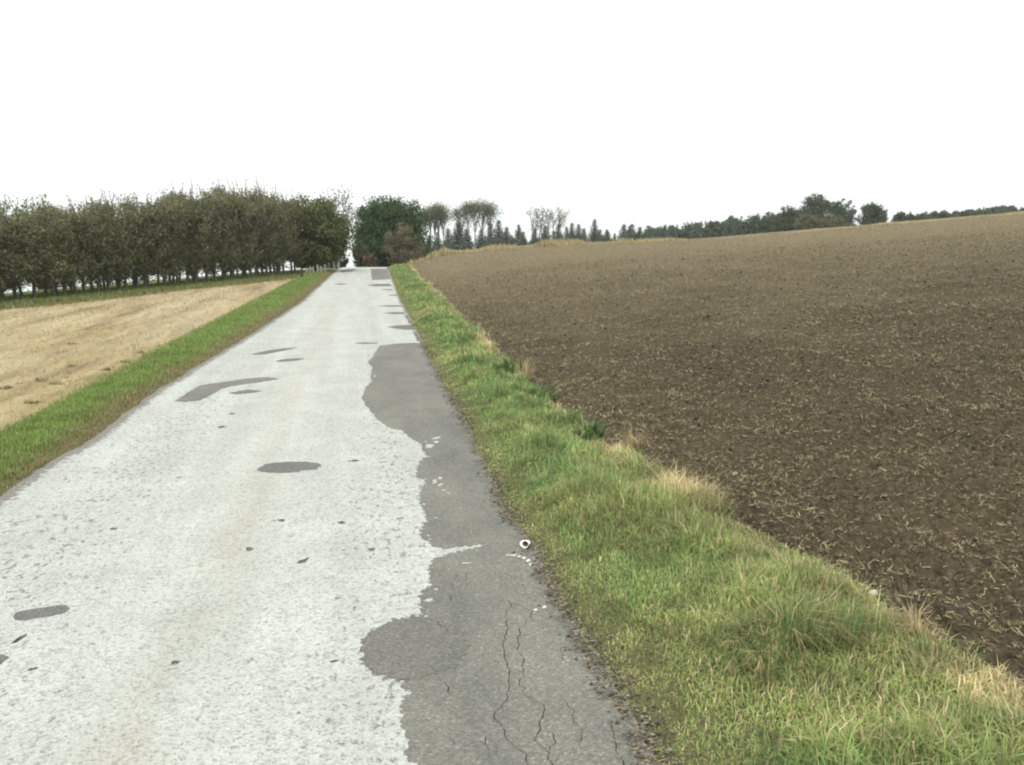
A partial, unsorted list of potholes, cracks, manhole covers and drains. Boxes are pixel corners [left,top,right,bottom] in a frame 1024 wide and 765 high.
crack [485,604,555,765]
